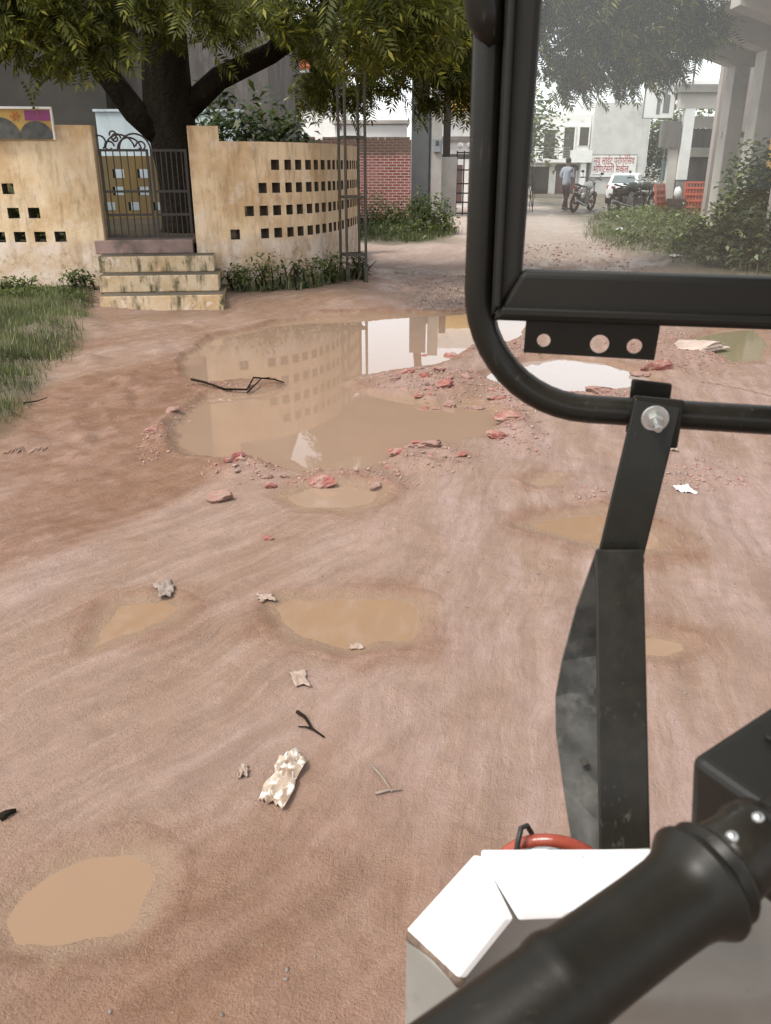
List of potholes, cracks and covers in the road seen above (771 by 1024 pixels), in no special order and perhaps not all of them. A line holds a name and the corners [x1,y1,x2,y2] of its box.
pothole [256,472,408,519]
pothole [683,328,771,364]
pothole [472,352,669,393]
pothole [498,501,690,563]
pothole [0,821,198,992]
pothole [155,308,526,474]
pothole [244,582,452,663]
pothole [64,586,206,665]
